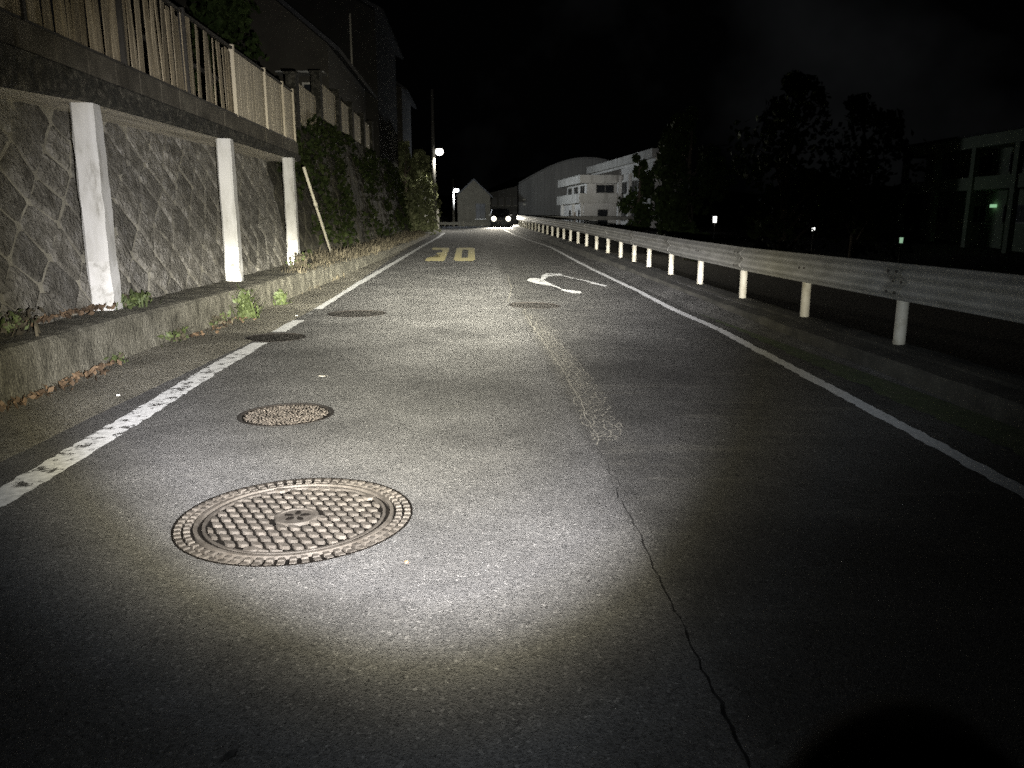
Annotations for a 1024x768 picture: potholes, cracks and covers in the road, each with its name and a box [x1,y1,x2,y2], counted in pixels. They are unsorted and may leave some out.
manhole cover [171,478,413,567]
crack [507,275,751,768]
manhole cover [237,403,334,427]
